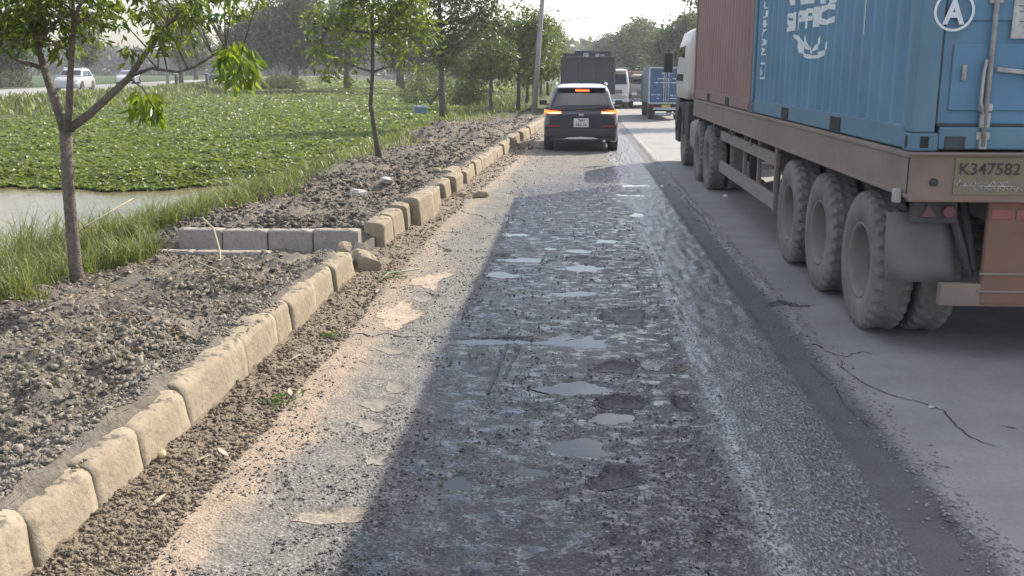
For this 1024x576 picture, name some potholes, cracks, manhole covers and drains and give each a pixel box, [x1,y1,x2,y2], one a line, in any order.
pothole [585,464,643,491]
pothole [592,359,640,375]
pothole [672,397,696,411]
pothole [594,394,649,410]
crack [808,343,995,446]
